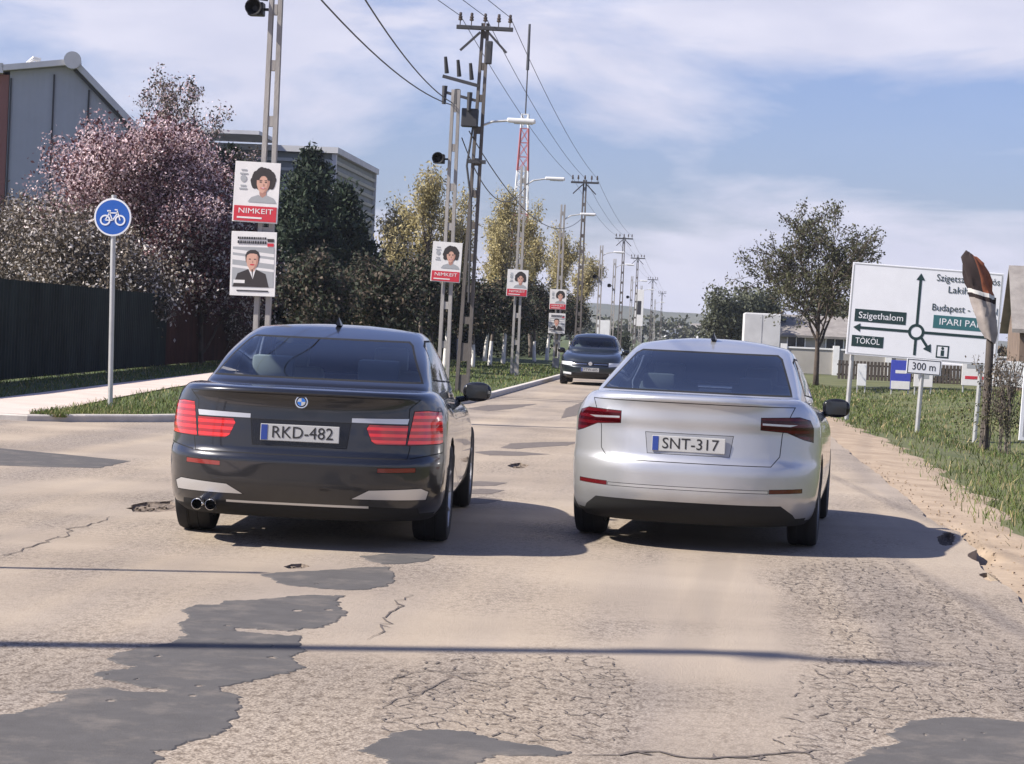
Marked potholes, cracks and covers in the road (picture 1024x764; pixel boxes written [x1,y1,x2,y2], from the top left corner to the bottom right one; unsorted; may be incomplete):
pothole [127,501,176,512]
crack [585,555,1024,761]
crack [3,517,108,555]
crack [372,654,636,743]
pothole [937,532,956,546]
crack [368,593,412,639]
